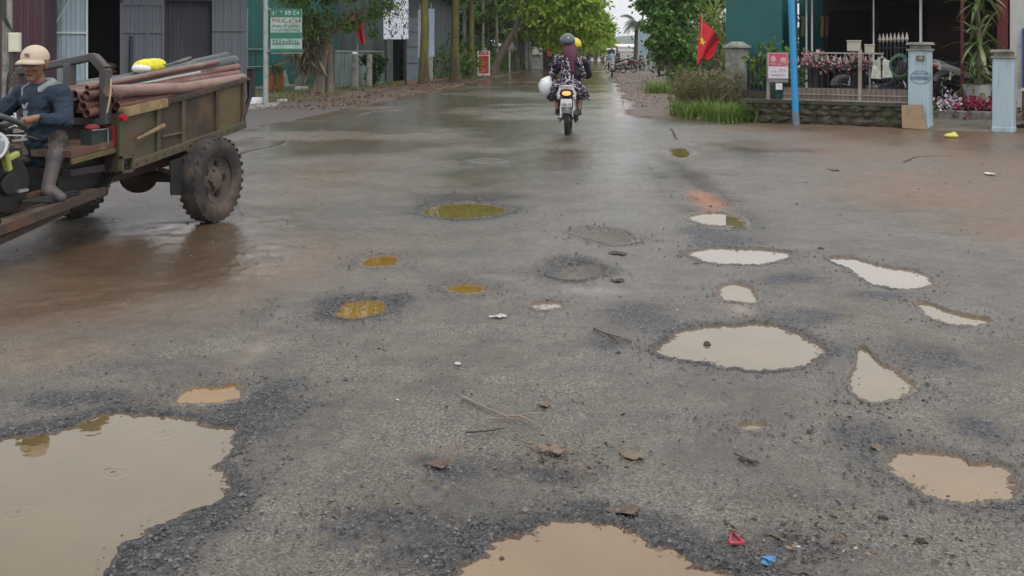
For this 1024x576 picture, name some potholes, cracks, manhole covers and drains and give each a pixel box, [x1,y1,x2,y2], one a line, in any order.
pothole [327,296,395,321]
pothole [430,510,758,576]
pothole [711,280,763,305]
pothole [681,211,751,231]
pothole [681,245,799,266]
pothole [438,281,494,295]
pothole [412,200,516,220]
pothole [912,299,999,328]
pothole [646,319,836,374]
pothole [841,344,922,406]
pothole [166,379,252,407]
pothole [524,298,570,311]
